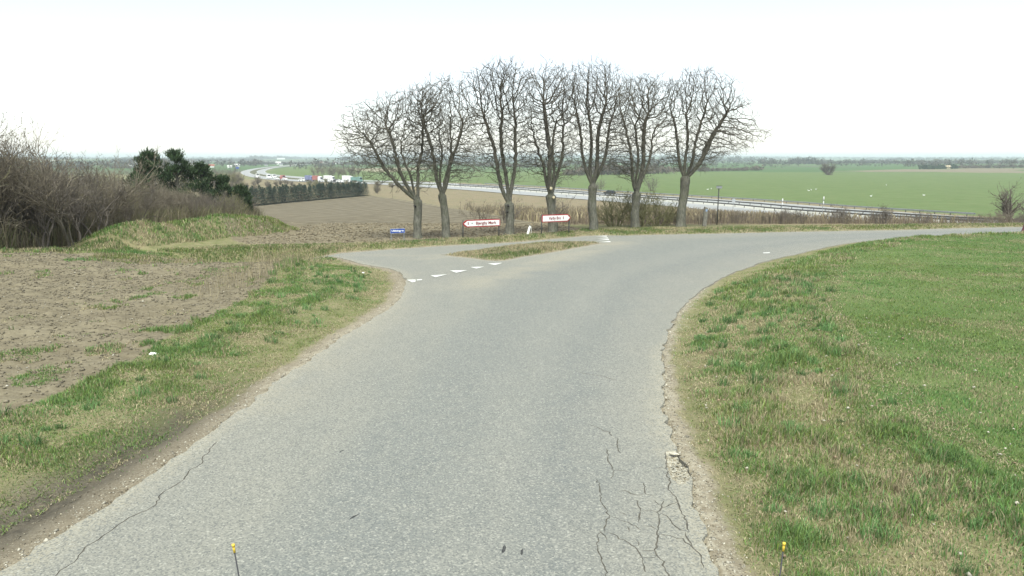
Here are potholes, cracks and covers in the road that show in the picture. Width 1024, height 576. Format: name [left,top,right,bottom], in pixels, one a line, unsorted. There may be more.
crack [591,425,704,576]
pothole [664,451,691,484]
crack [55,442,217,576]
